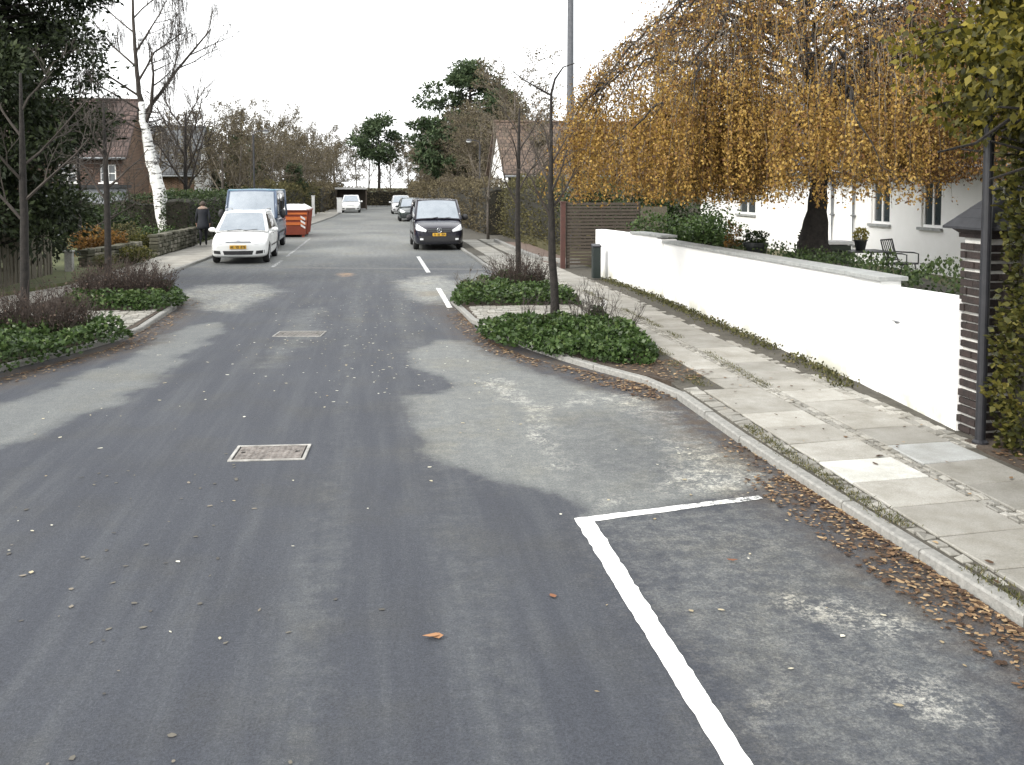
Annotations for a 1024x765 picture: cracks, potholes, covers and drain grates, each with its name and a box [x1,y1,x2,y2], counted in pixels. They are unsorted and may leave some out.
manhole cover [227,444,311,462]
